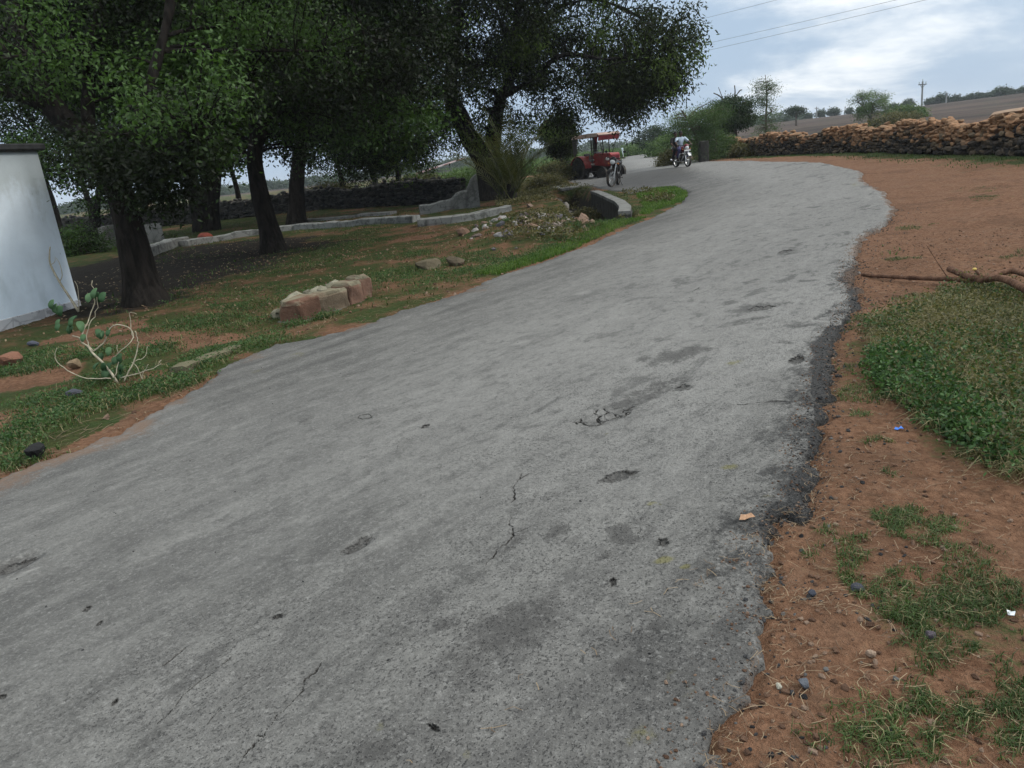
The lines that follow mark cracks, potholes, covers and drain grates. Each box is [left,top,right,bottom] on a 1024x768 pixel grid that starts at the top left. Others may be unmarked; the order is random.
crack [242,664,321,759]
pothole [342,535,372,555]
pothole [0,557,37,575]
pothole [602,470,640,484]
